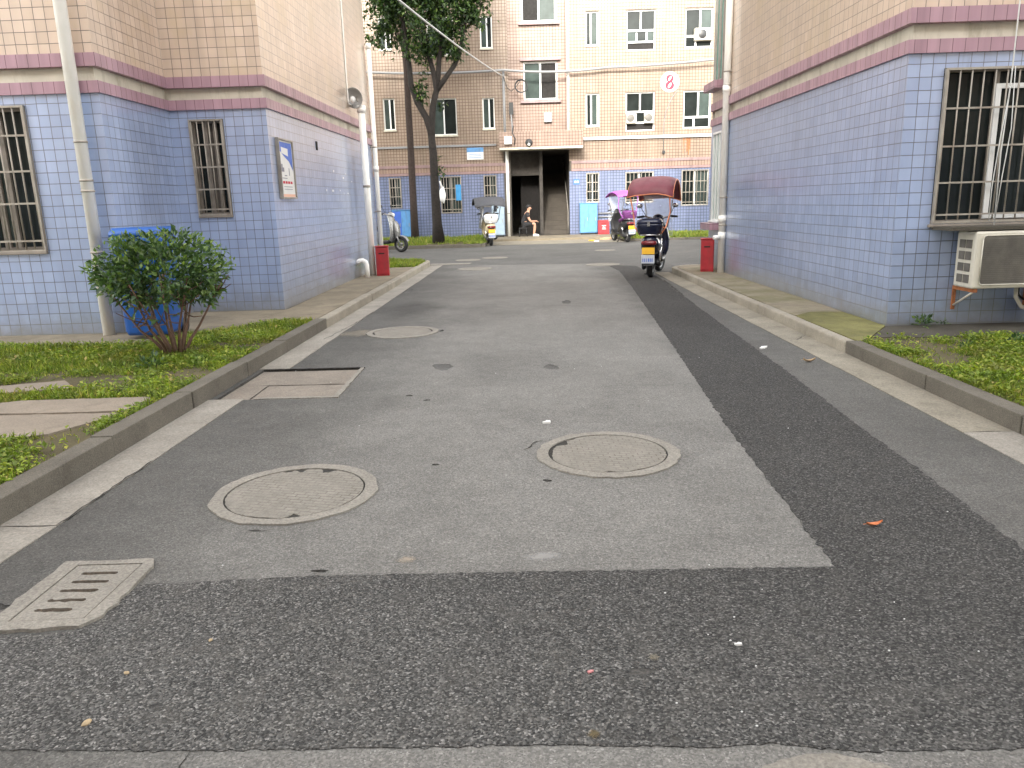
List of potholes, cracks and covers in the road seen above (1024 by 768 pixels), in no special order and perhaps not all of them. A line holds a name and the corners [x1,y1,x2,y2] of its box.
drain grate [0,558,154,634]
manhole cover [207,464,378,526]
manhole cover [537,431,681,479]
utility cover [220,367,364,400]
manhole cover [366,326,439,339]
